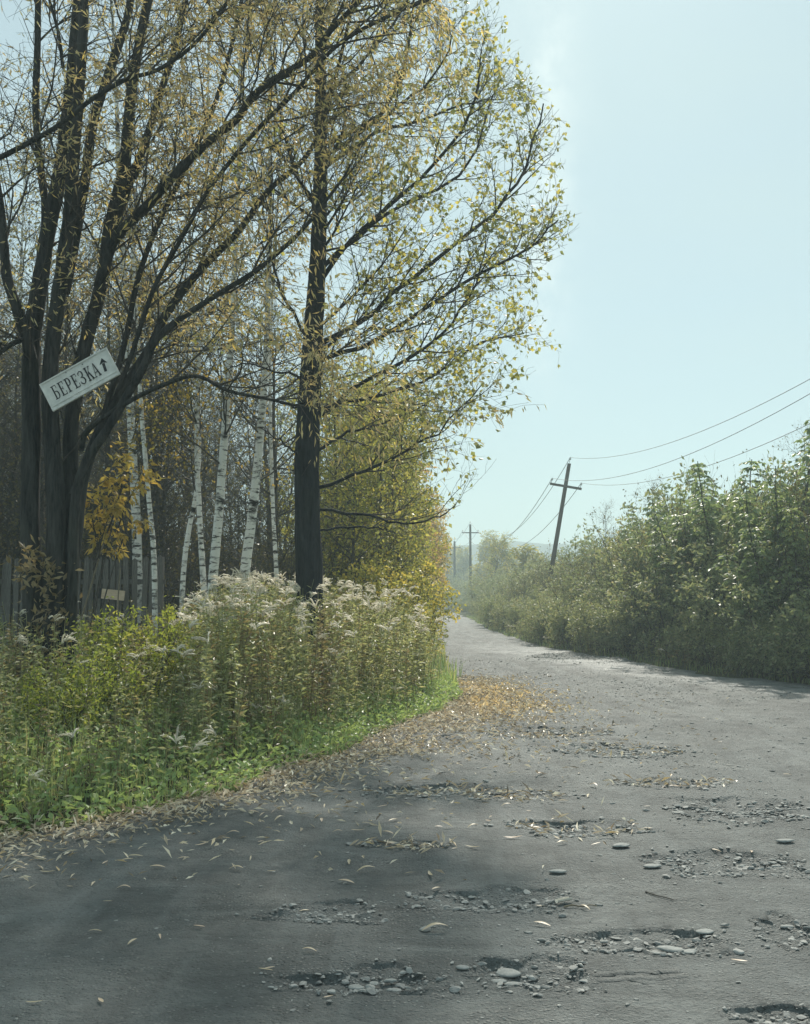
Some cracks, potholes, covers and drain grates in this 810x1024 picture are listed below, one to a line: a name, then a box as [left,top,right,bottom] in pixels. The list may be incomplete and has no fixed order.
pothole [627,842,810,884]
pothole [500,921,781,961]
pothole [527,739,703,760]
pothole [347,837,455,849]
pothole [612,777,732,790]
pothole [640,790,810,834]
pothole [235,895,431,932]
pothole [718,1003,810,1024]
pothole [242,958,461,1003]
pothole [332,779,547,799]
pothole [364,880,587,918]
pothole [447,789,586,803]
